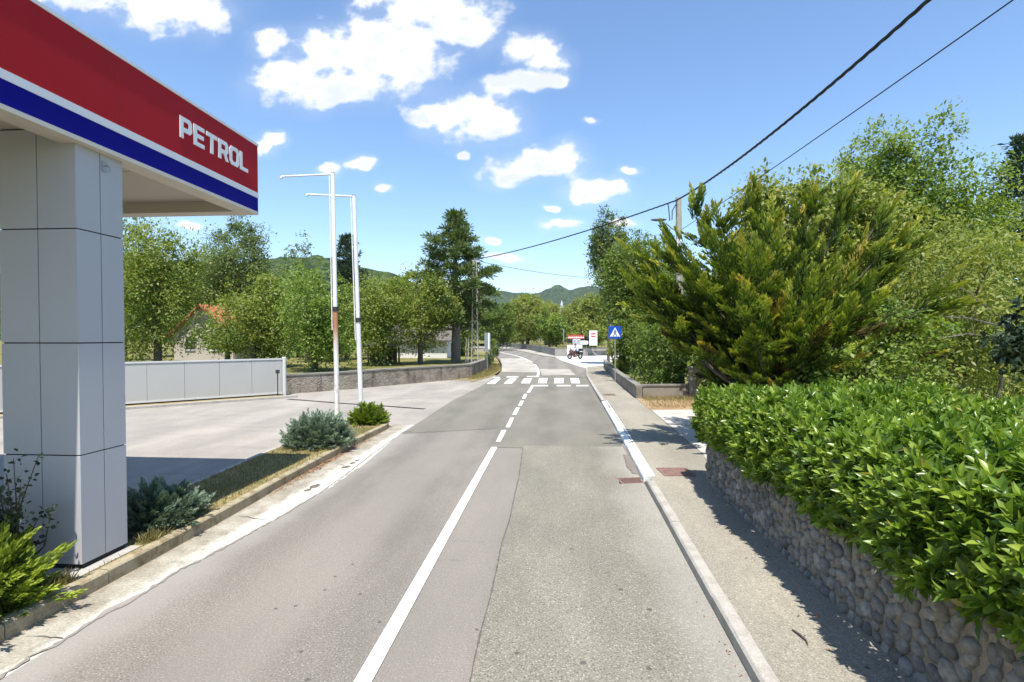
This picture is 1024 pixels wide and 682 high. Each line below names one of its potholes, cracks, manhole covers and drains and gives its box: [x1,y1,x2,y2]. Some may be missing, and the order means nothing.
manhole cover [656,468,696,476]
